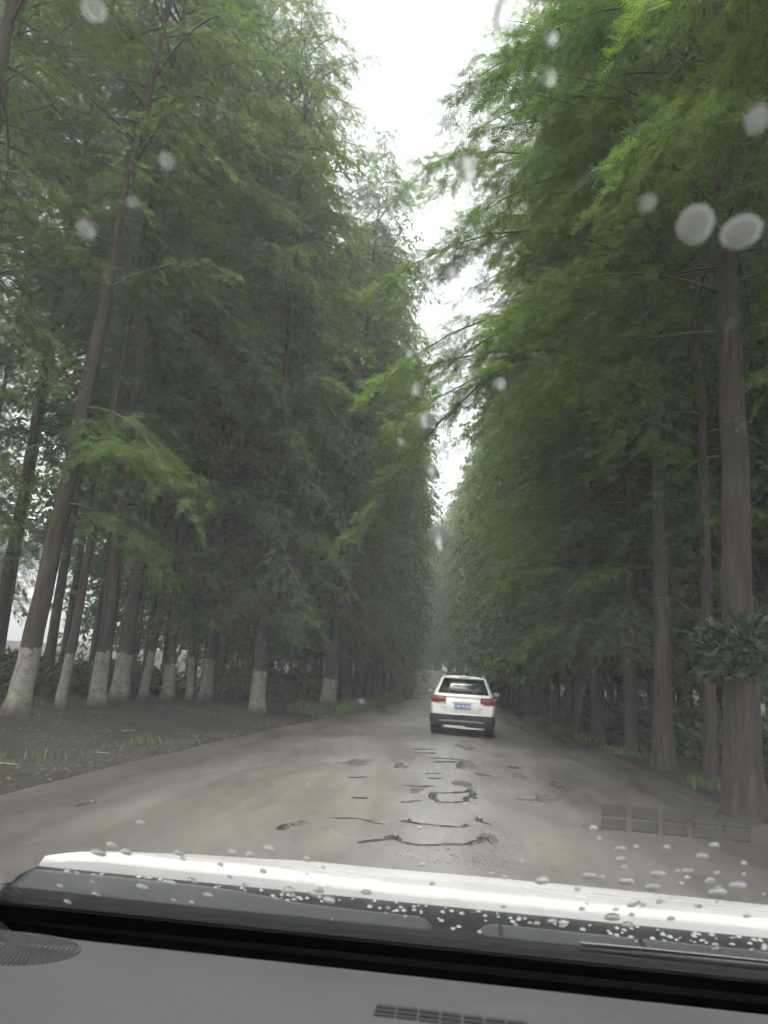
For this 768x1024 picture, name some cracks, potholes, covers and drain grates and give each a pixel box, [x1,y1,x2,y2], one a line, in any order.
pothole [456,759,476,769]
crack [332,749,528,847]
crack [513,779,570,802]
